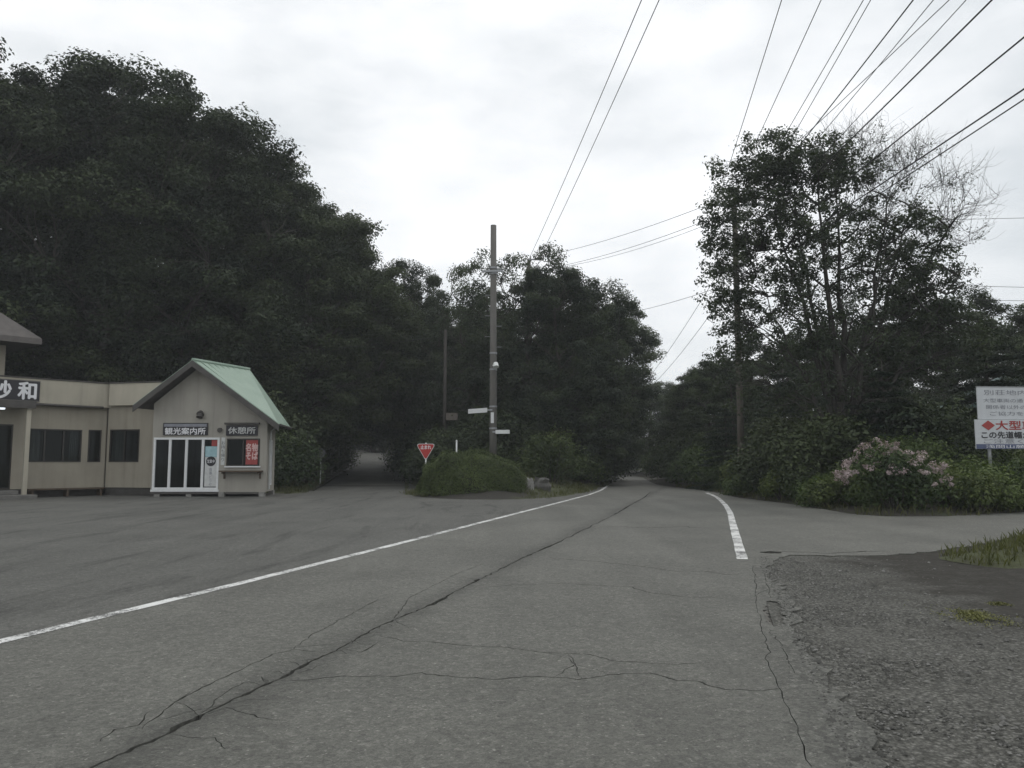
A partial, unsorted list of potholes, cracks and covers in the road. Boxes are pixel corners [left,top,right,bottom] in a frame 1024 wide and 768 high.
crack [282,565,812,767]
